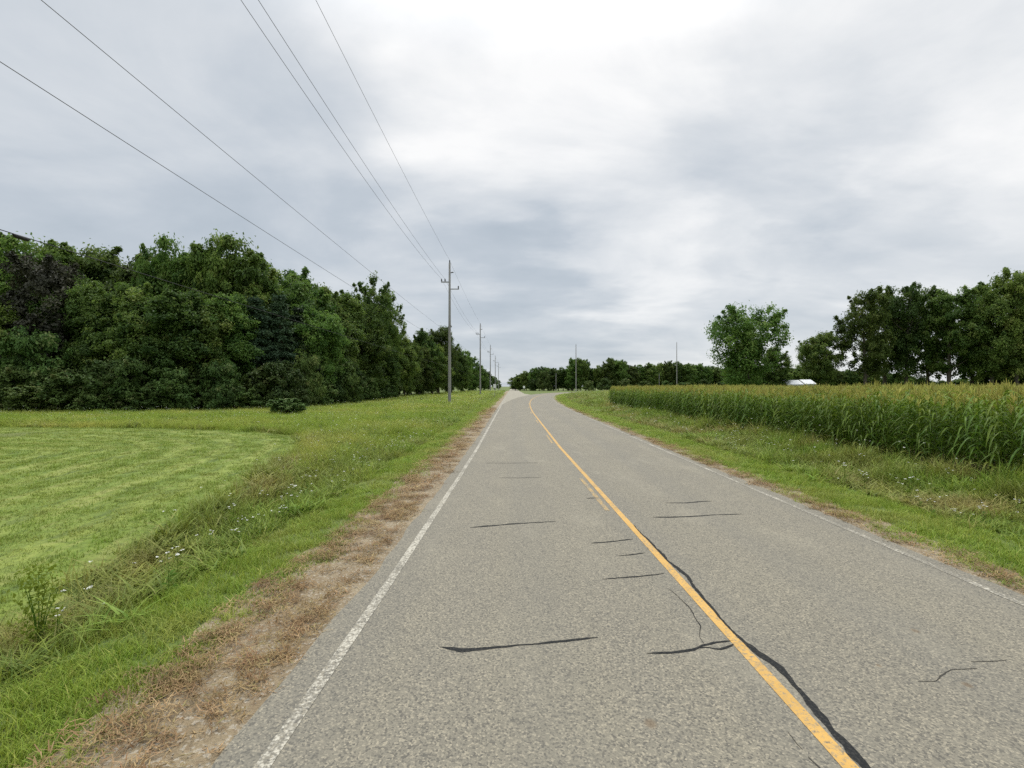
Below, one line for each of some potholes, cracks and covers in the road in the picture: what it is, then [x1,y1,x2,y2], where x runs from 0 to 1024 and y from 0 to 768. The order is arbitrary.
crack [929,660,1003,682]
